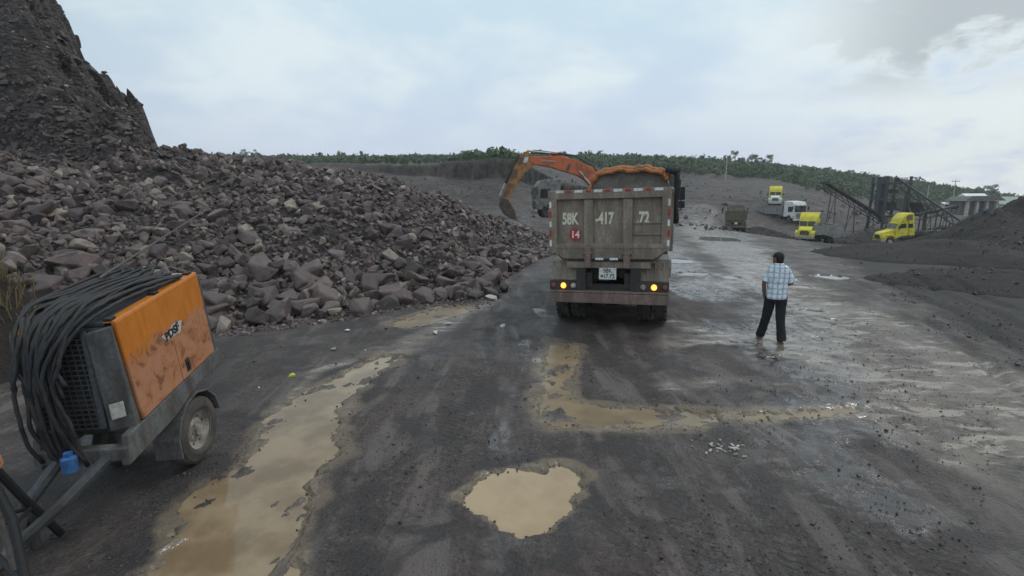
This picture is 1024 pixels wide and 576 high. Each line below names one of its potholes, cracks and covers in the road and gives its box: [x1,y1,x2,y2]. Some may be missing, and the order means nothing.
pothole [526,341,742,435]
pothole [714,402,872,426]
pothole [441,455,600,555]
pothole [121,349,414,576]
pothole [382,304,486,330]
